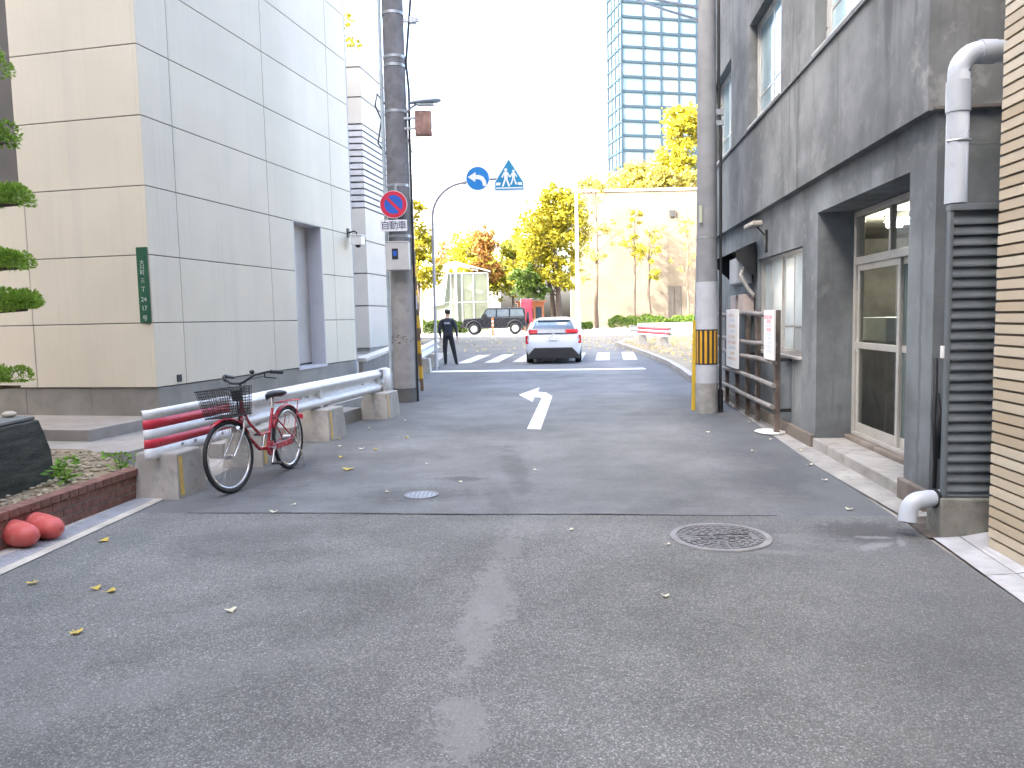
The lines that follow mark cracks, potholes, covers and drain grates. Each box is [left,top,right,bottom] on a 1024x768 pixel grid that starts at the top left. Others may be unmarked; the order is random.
manhole cover [404,490,439,499]
manhole cover [670,523,773,552]
